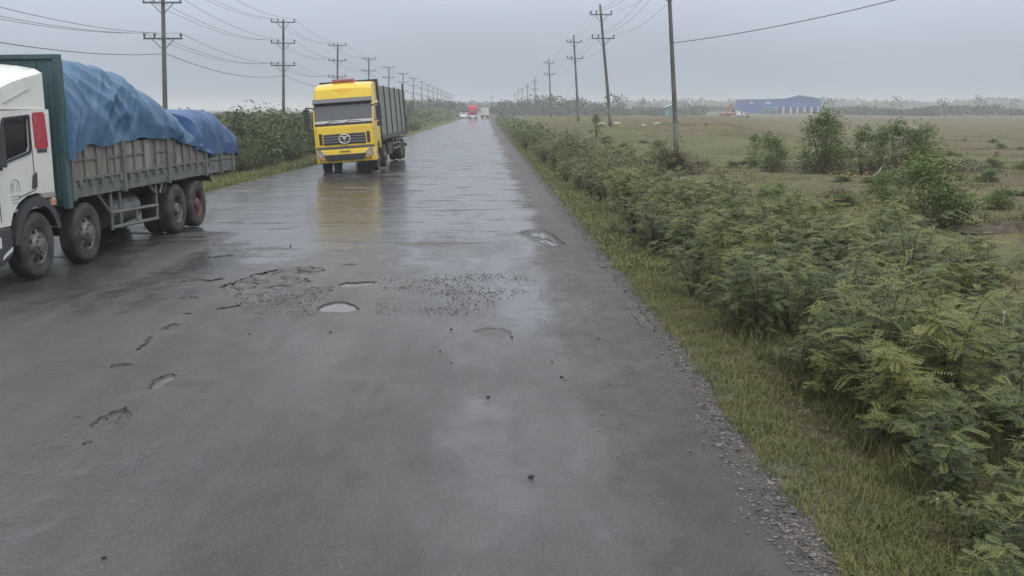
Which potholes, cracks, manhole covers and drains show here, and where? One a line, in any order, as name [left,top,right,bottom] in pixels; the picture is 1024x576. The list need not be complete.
pothole [89,404,132,431]
pothole [473,327,511,338]
pothole [148,373,177,391]
pothole [517,228,568,246]
pothole [316,300,360,313]
